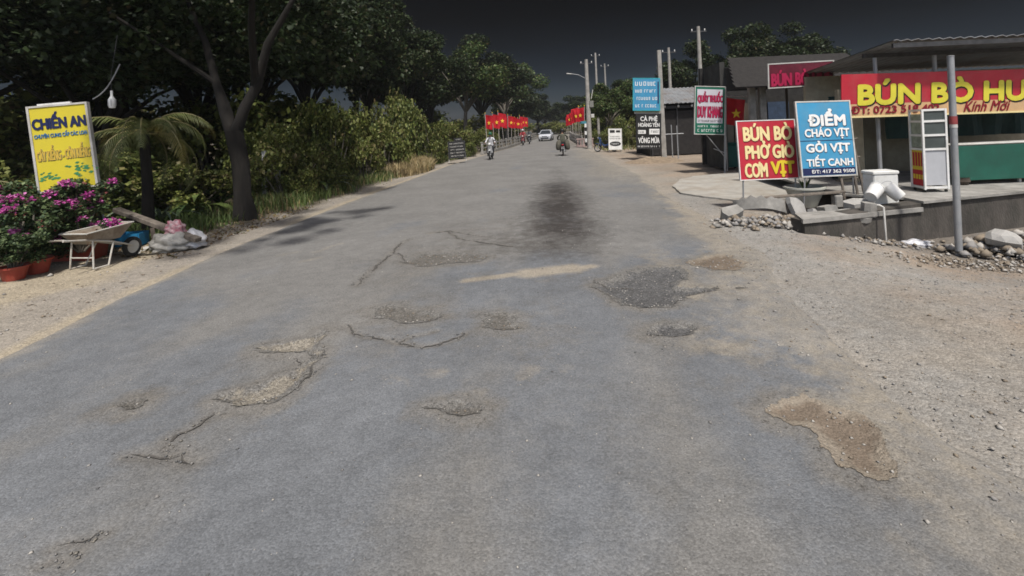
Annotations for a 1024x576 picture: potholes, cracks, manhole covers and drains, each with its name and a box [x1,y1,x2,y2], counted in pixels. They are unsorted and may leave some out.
pothole [482,311,522,330]
crack [41,530,109,568]
pothole [686,254,749,271]
pothole [212,328,331,406]
crack [351,243,409,285]
pothole [647,322,697,337]
pothole [764,393,898,481]
crack [348,324,465,349]
crack [125,414,214,464]
pothole [117,398,148,410]
pothole [422,399,485,416]
pothole [400,251,490,267]
